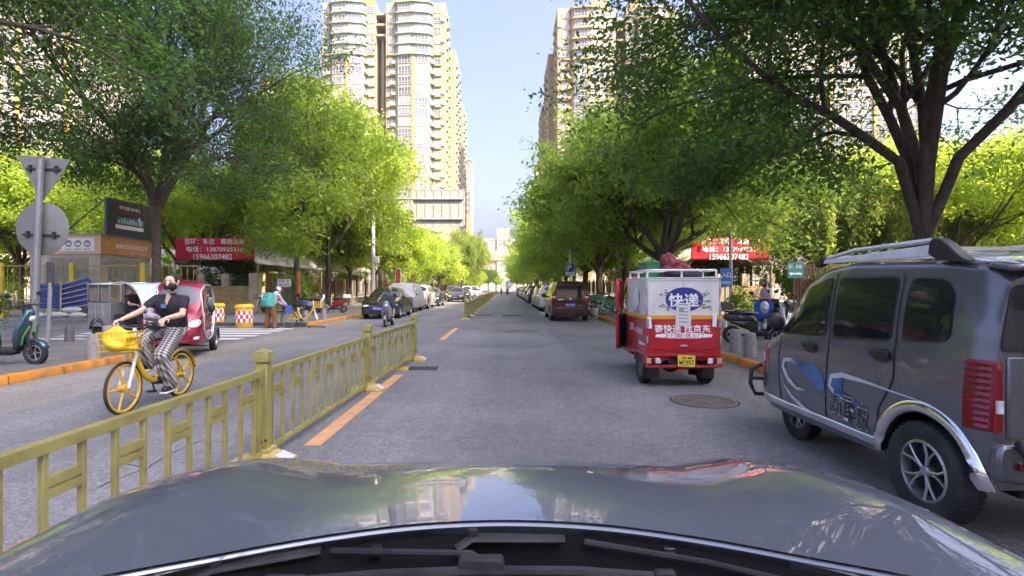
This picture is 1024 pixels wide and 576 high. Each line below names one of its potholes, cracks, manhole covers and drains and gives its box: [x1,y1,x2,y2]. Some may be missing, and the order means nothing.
crack [90,436,212,491]
manhole cover [669,394,740,408]
